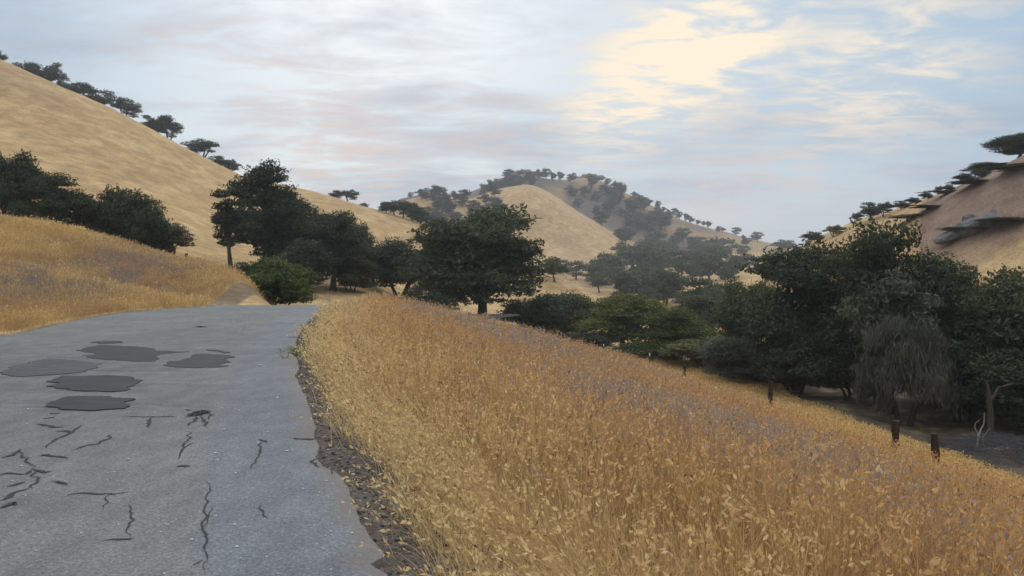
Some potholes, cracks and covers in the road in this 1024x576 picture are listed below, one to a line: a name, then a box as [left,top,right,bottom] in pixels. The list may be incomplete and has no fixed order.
crack [0,412,135,541]
crack [250,439,267,470]
crack [127,409,213,574]
